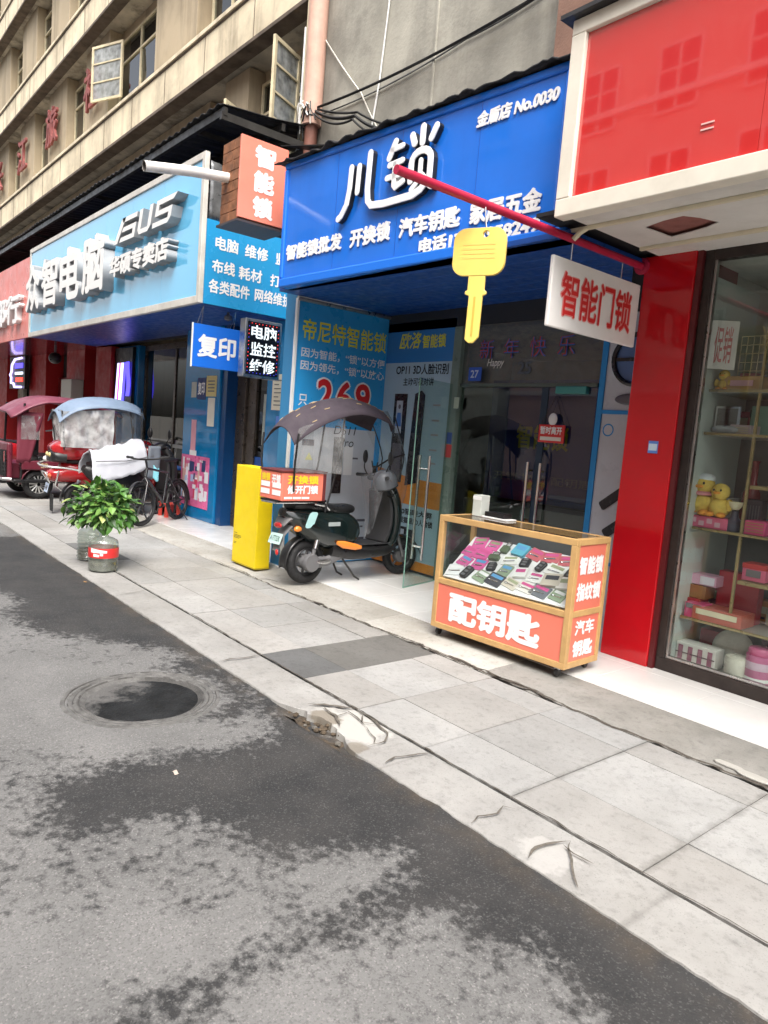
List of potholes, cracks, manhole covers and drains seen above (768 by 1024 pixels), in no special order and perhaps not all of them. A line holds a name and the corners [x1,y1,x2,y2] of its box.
manhole cover [60,671,221,729]
pothole [283,711,344,753]
